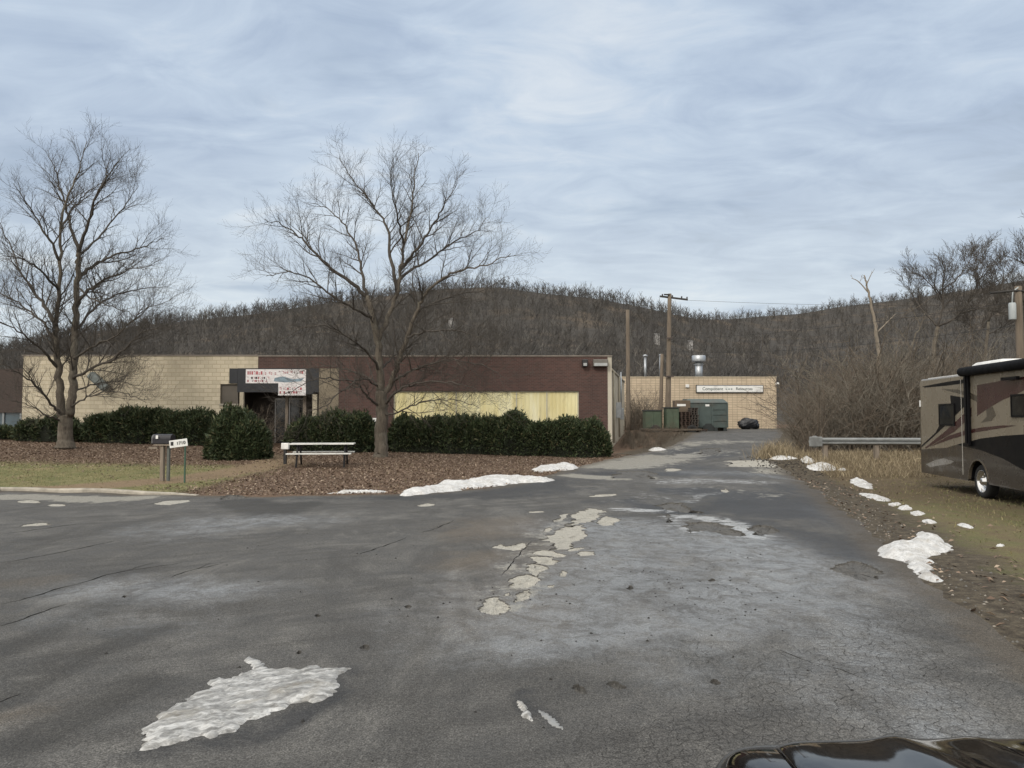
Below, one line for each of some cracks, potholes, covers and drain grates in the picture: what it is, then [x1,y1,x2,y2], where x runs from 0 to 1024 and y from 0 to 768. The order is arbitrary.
pothole [830,561,885,581]
pothole [747,525,779,536]
pothole [682,522,746,537]
crack [1,561,222,626]
